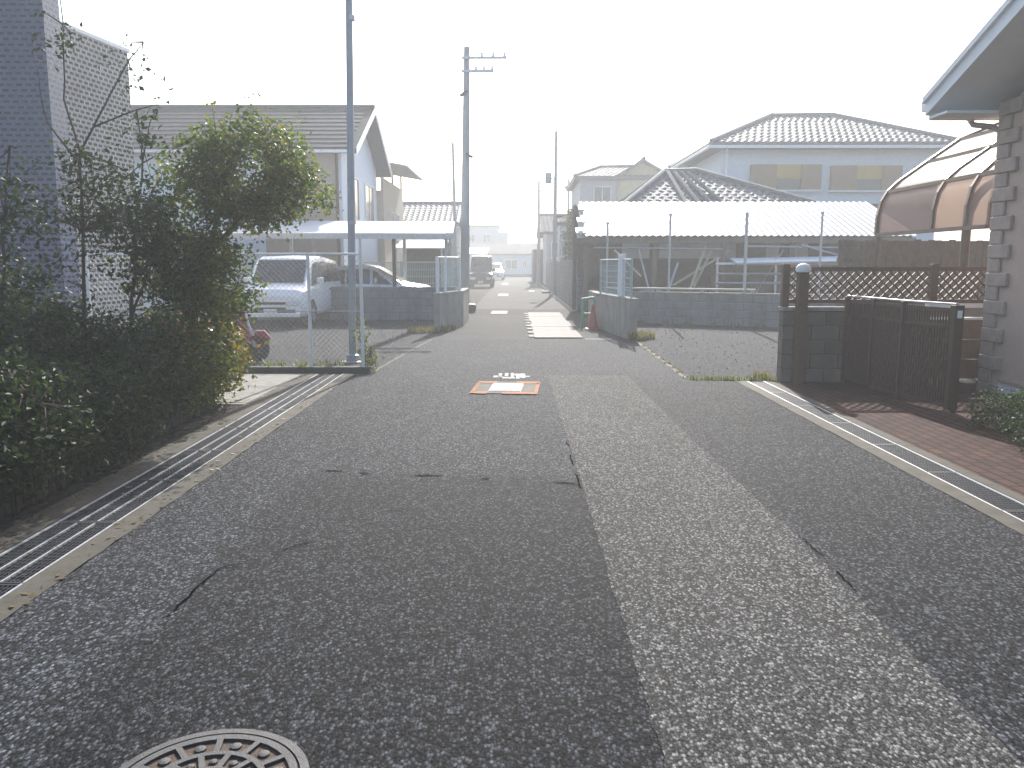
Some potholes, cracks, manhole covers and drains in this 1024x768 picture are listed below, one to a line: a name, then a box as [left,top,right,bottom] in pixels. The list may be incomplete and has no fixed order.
drain grate [748,381,787,393]
drain grate [0,522,116,584]
utility cover [469,381,540,394]
drain grate [926,472,1024,511]
manhole cover [119,729,310,768]
drain grate [872,444,956,473]
drain grate [225,409,289,428]
drain grate [0,583,23,599]
drain grate [256,395,311,410]
drain grate [302,373,344,384]
drain grate [281,383,329,395]
drain grate [769,392,816,406]
